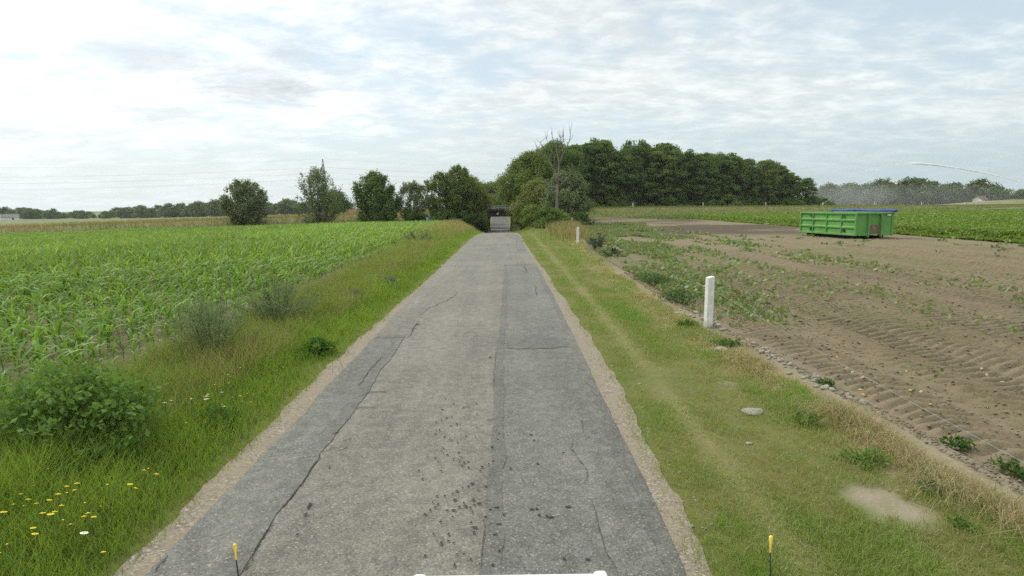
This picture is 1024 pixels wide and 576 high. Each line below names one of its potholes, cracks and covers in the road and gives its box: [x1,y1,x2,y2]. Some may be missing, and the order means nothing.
crack [244,431,350,570]
